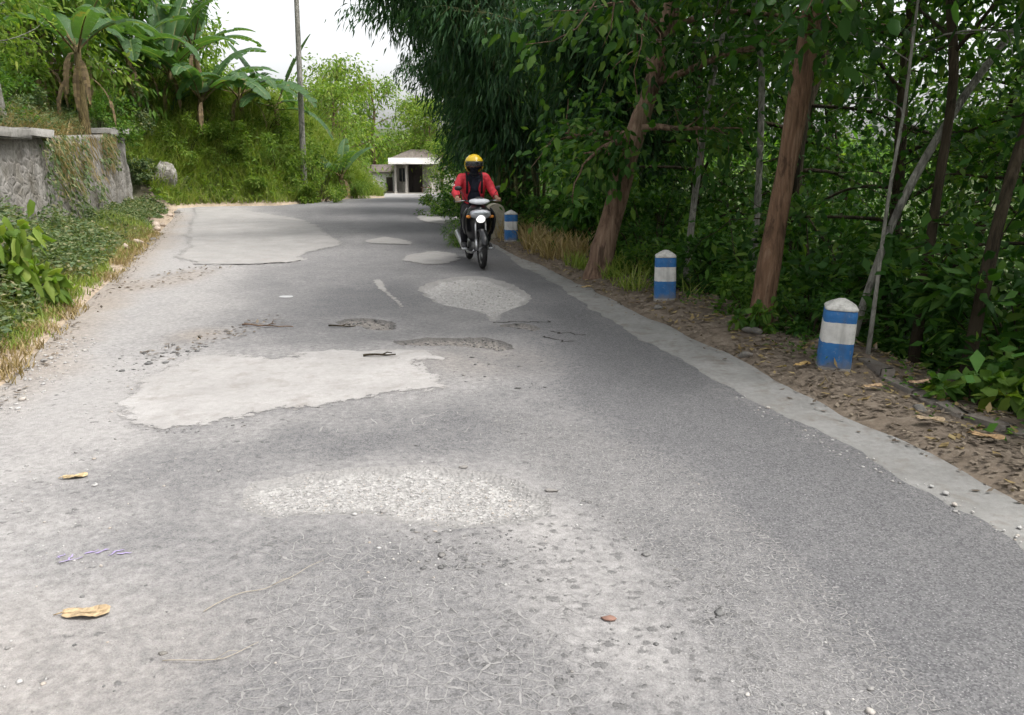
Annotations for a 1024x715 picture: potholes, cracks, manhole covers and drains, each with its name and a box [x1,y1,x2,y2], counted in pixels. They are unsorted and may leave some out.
pothole [393,337,514,351]
pothole [335,318,397,330]
